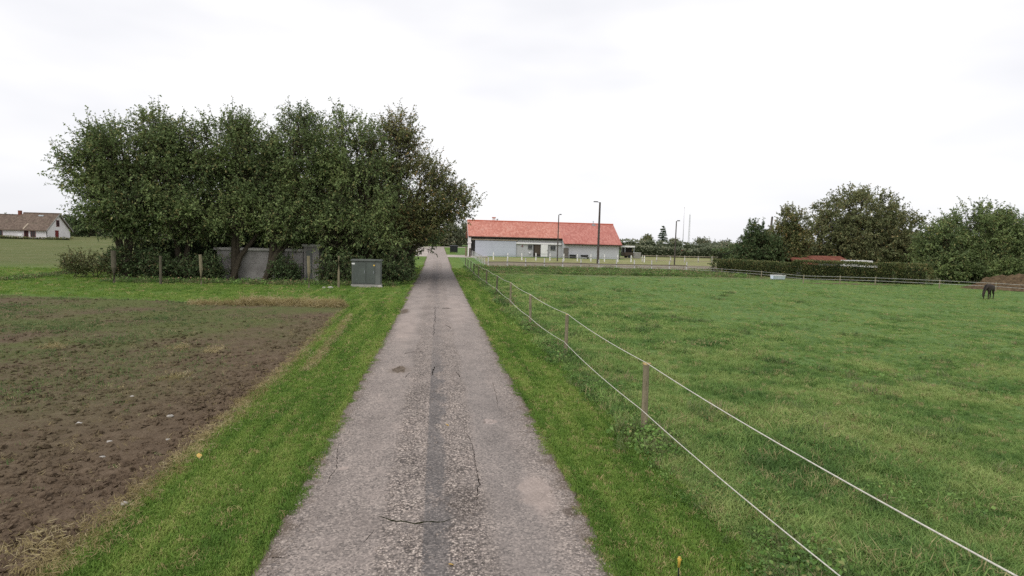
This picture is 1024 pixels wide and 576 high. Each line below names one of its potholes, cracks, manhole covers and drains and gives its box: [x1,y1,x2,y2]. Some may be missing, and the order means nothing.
crack [457,425,481,507]
crack [365,516,453,541]
